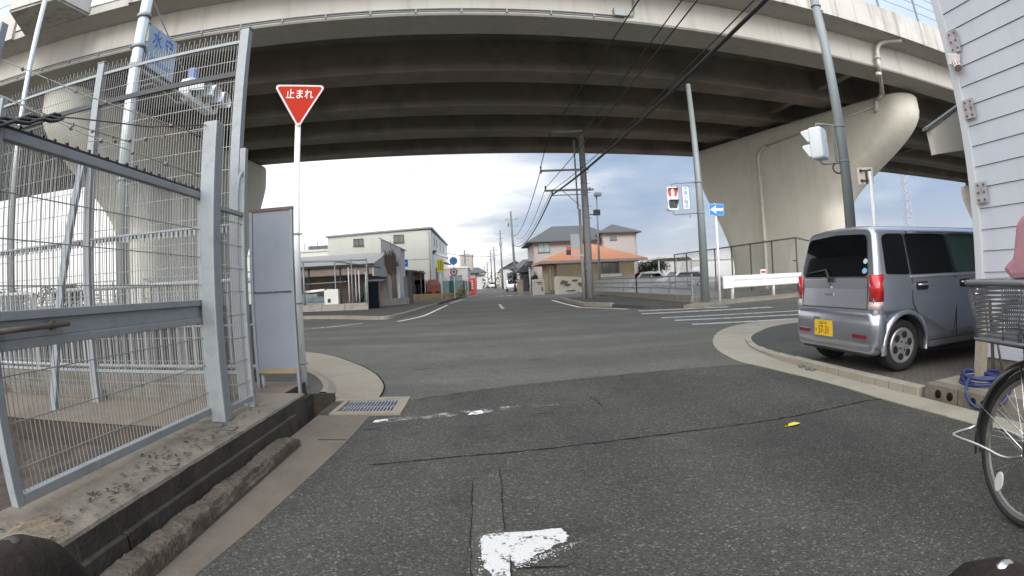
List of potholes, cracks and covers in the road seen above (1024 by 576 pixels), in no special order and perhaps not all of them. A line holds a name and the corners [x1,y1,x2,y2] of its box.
crack [371,399,877,530]
drain grate [329,396,410,416]
